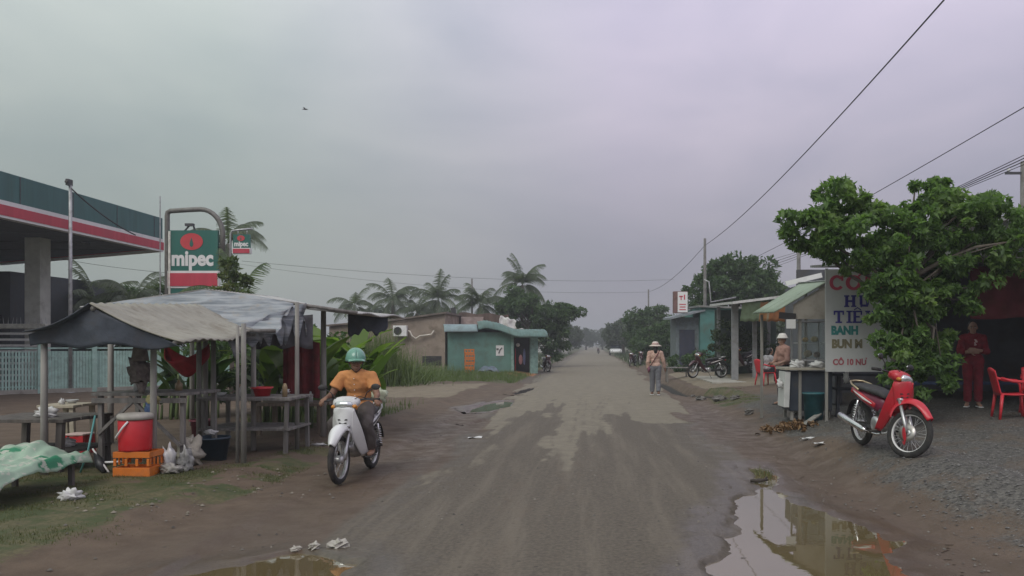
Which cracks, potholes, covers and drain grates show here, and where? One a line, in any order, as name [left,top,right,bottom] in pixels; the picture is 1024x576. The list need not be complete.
pothole [679,461,964,576]
pothole [109,544,398,576]
pothole [455,400,525,414]
